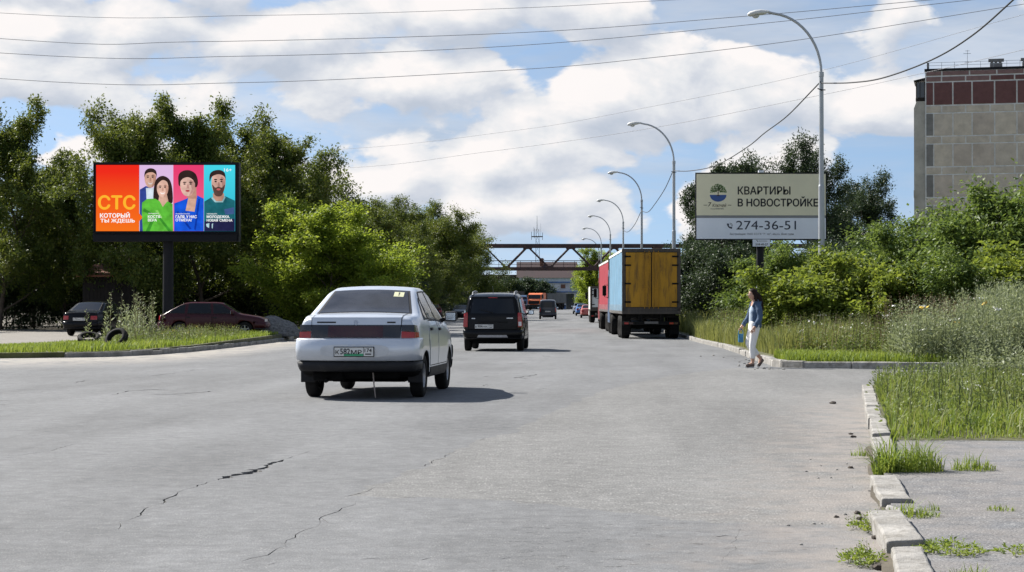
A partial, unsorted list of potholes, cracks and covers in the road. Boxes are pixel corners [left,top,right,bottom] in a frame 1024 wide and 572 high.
crack [234,489,371,565]
